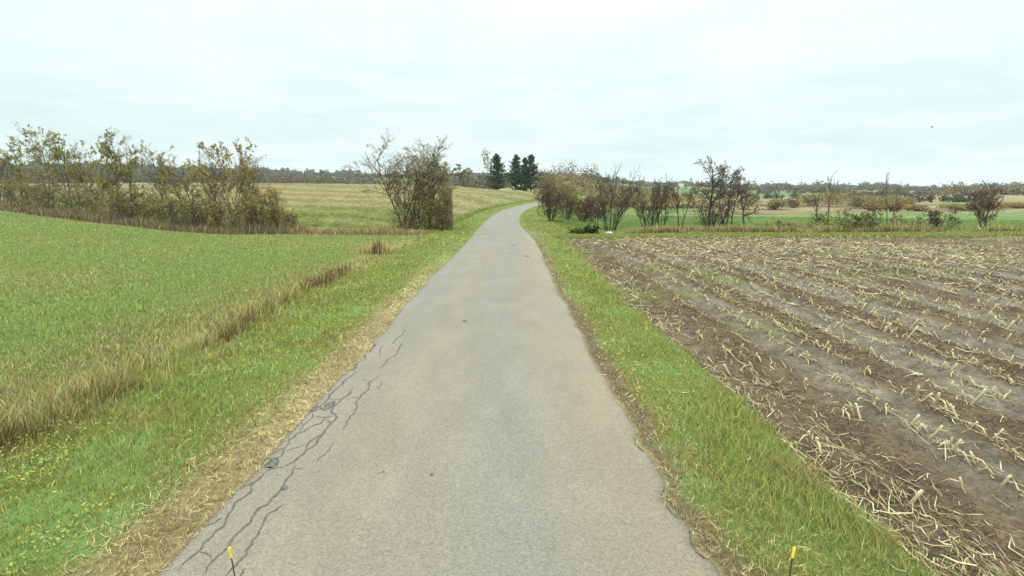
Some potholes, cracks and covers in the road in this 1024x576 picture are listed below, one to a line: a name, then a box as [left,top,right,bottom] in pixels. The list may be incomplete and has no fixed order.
crack [177,329,405,576]
